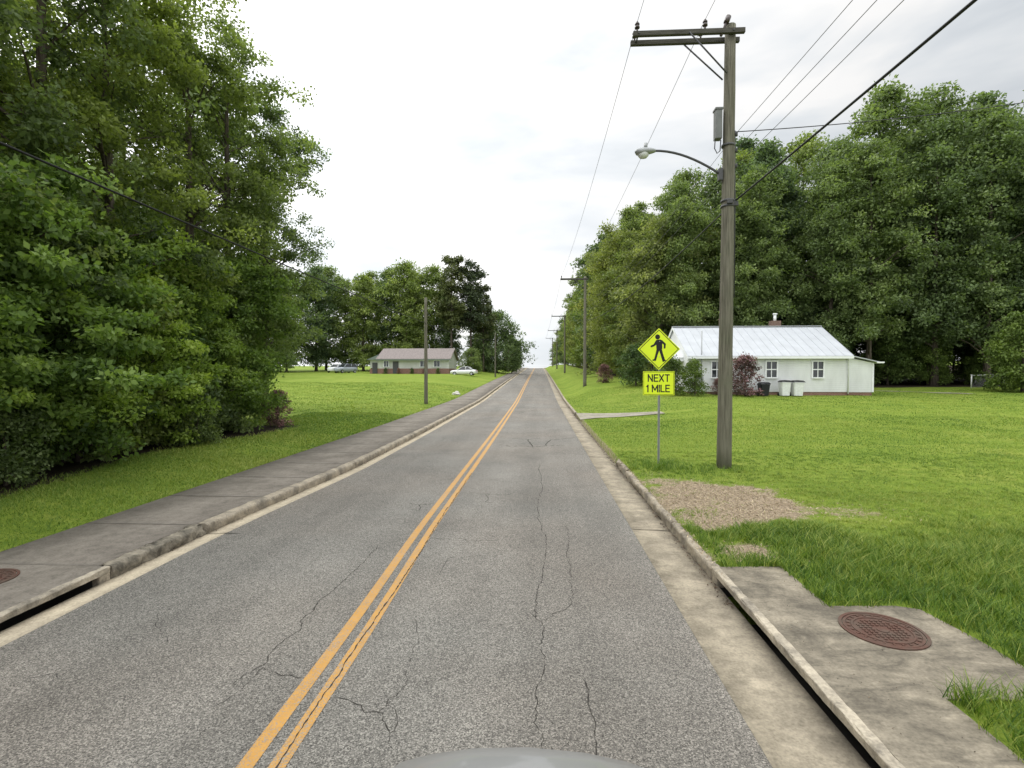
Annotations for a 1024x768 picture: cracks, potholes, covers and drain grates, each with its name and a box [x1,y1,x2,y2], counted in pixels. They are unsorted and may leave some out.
crack [532,469,574,749]
manhole cover [0,568,20,584]
crack [584,680,597,755]
manhole cover [838,612,932,651]
drain grate [0,564,110,632]
crack [219,547,378,704]
